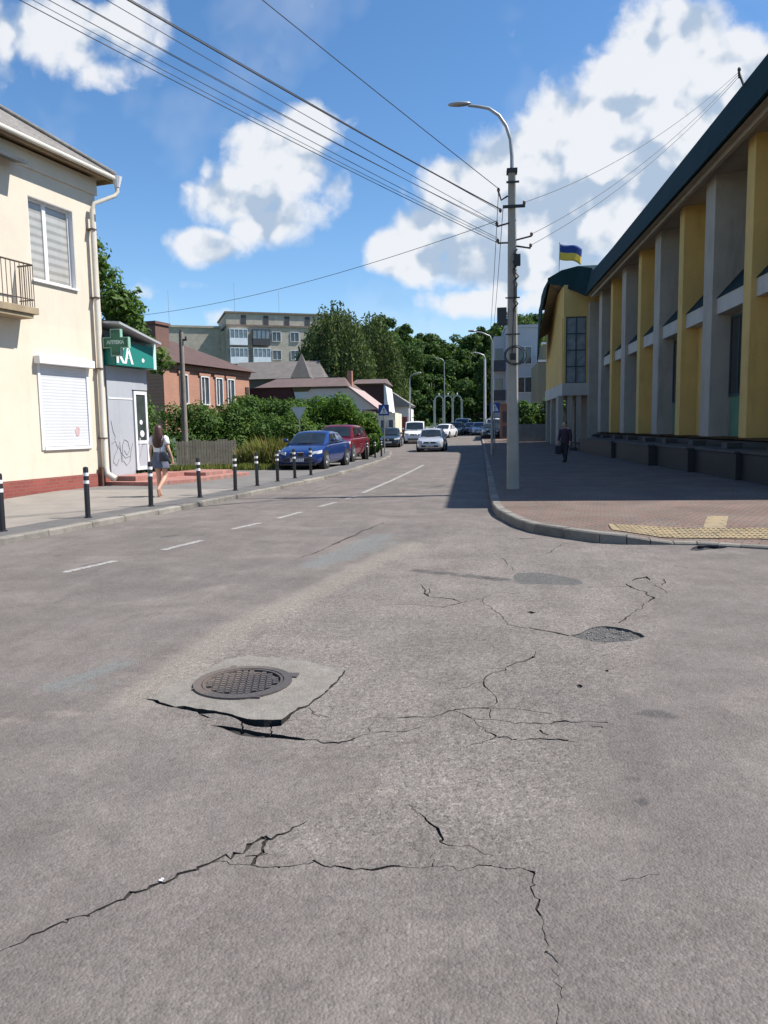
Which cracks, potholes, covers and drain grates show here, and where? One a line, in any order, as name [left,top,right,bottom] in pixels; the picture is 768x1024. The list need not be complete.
crack [0,807,563,1024]
crack [378,585,569,636]
crack [619,565,686,623]
pothole [571,626,645,643]
crack [212,651,608,751]
